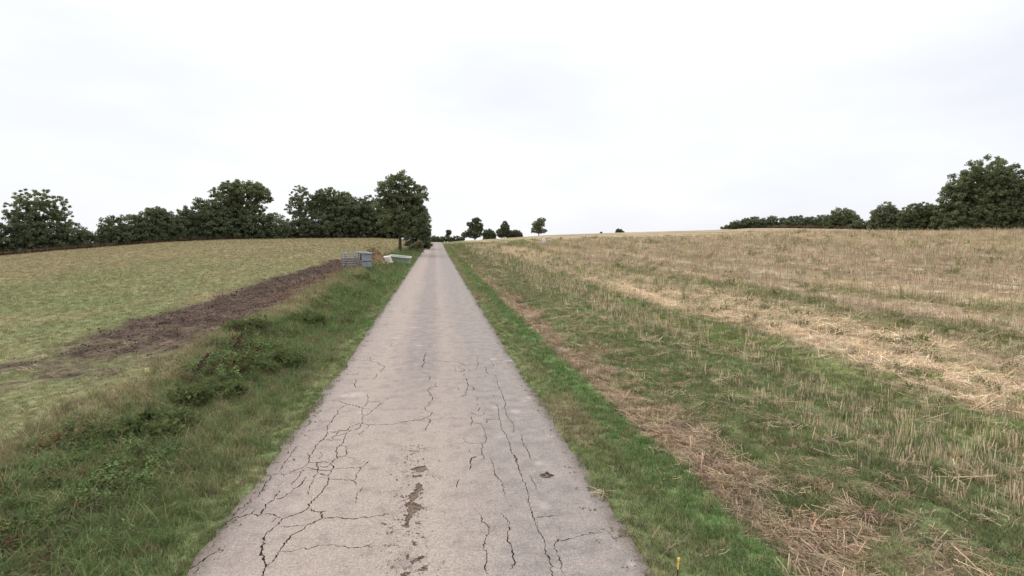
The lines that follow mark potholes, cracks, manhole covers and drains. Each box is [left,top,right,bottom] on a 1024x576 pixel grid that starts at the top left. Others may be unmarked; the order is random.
pothole [402,483,423,528]
crack [224,354,616,576]
